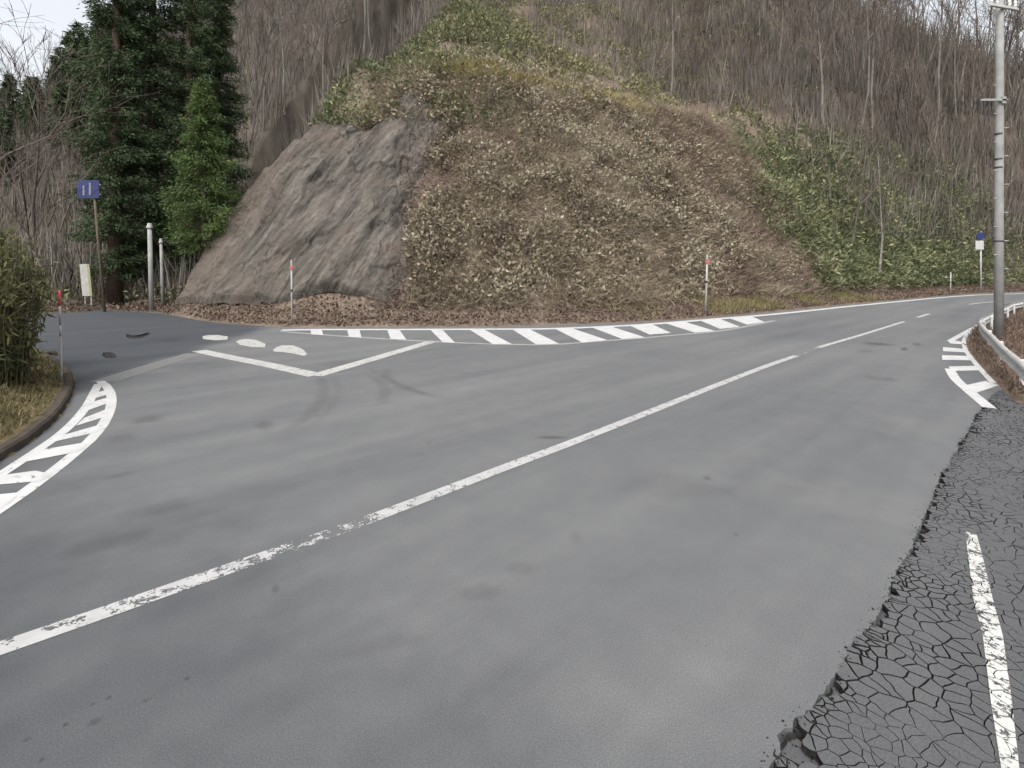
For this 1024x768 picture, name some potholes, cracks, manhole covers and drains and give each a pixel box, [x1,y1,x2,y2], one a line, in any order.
crack [760,390,1024,768]
